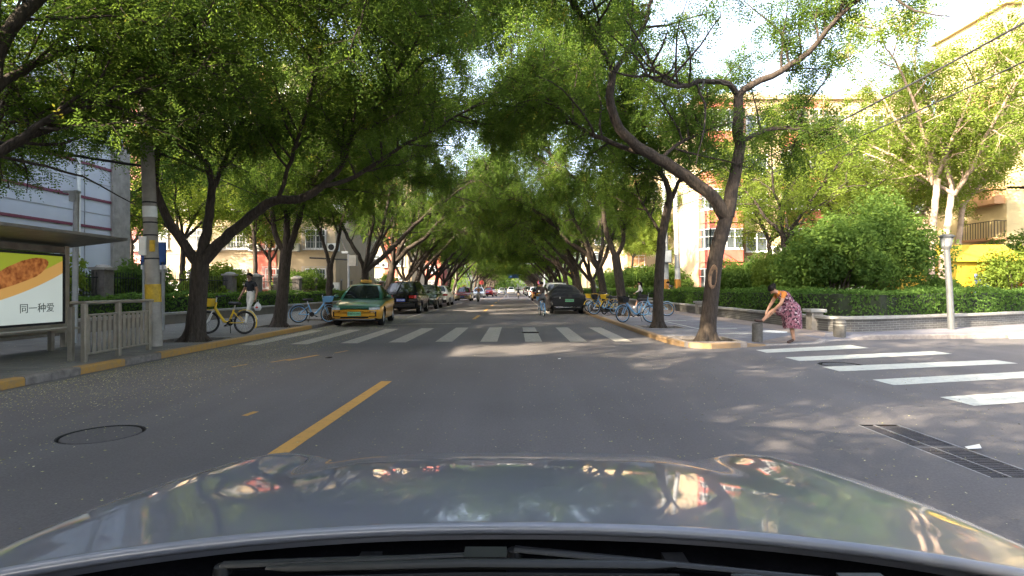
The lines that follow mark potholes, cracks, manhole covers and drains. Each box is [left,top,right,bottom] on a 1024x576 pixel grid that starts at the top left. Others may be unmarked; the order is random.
drain grate [859,425,1024,478]
manhole cover [54,425,146,445]
